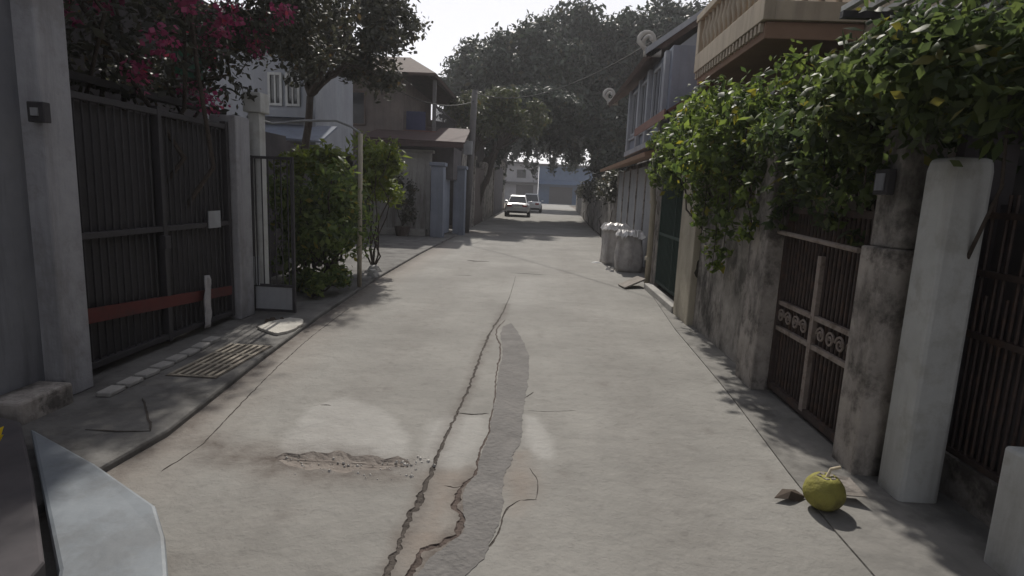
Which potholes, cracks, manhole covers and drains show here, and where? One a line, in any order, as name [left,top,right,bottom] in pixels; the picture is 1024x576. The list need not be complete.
drain grate [165,343,273,379]
pothole [275,450,410,473]
crack [405,320,538,576]
crack [162,308,349,471]
